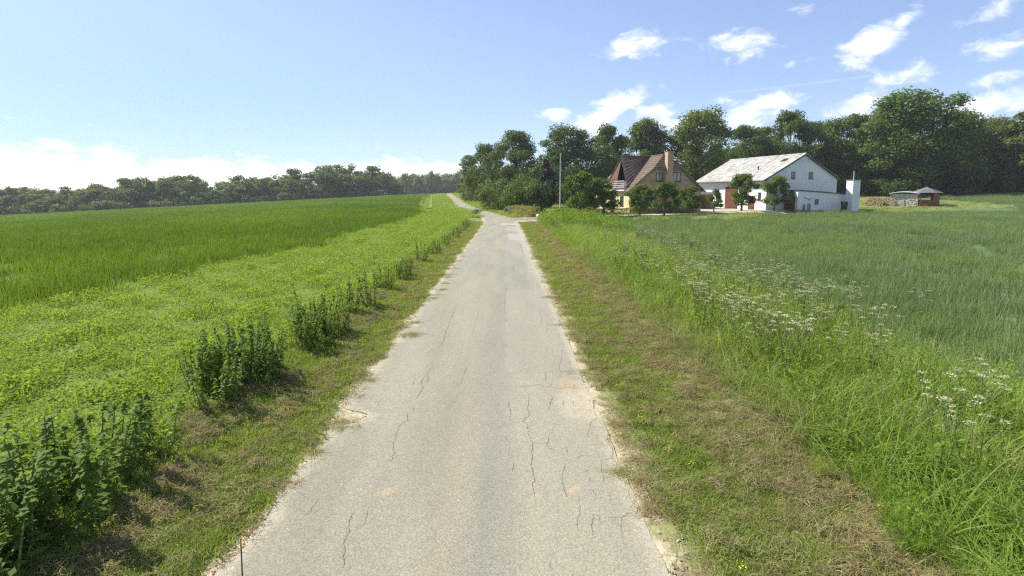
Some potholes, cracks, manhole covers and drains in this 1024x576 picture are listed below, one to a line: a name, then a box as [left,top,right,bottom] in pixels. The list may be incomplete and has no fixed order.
crack [505,356,631,534]
